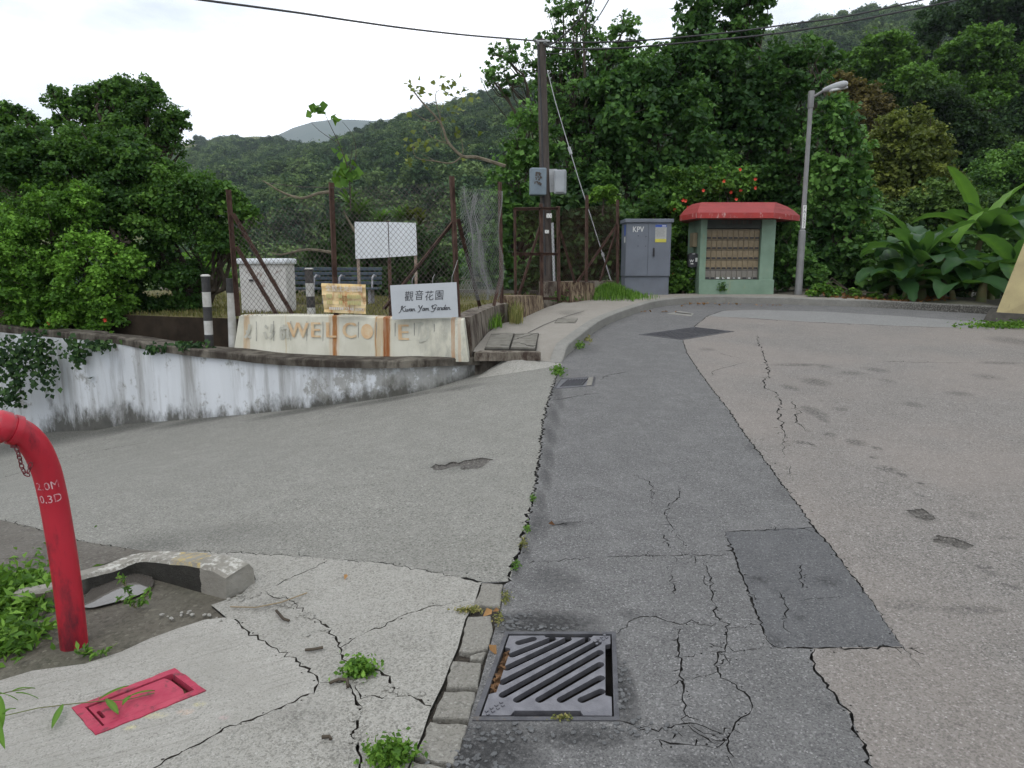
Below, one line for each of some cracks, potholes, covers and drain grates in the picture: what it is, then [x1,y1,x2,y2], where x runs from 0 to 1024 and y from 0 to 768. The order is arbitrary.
crack [755,335,812,457]
pothole [906,508,935,521]
drain grate [472,631,620,721]
pothole [431,458,493,470]
utility cover [484,333,515,351]
pothole [933,535,974,549]
utility cover [510,333,539,351]
utility cover [72,668,206,735]
drain grate [553,377,596,389]
crack [527,476,923,762]
crack [154,592,464,768]
